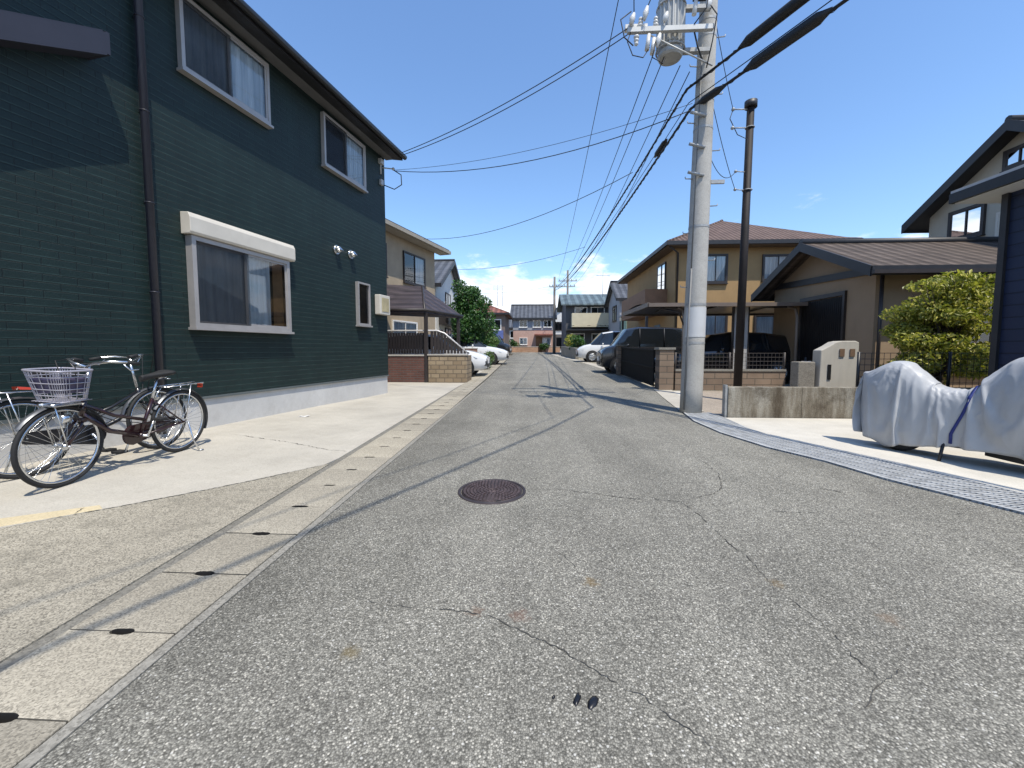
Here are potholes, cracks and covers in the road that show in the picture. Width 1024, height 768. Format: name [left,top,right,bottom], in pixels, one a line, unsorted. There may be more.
manhole cover [458,479,526,505]
drain grate [684,412,1024,515]
crack [359,598,738,768]
crack [538,457,774,589]
crack [788,597,899,707]
